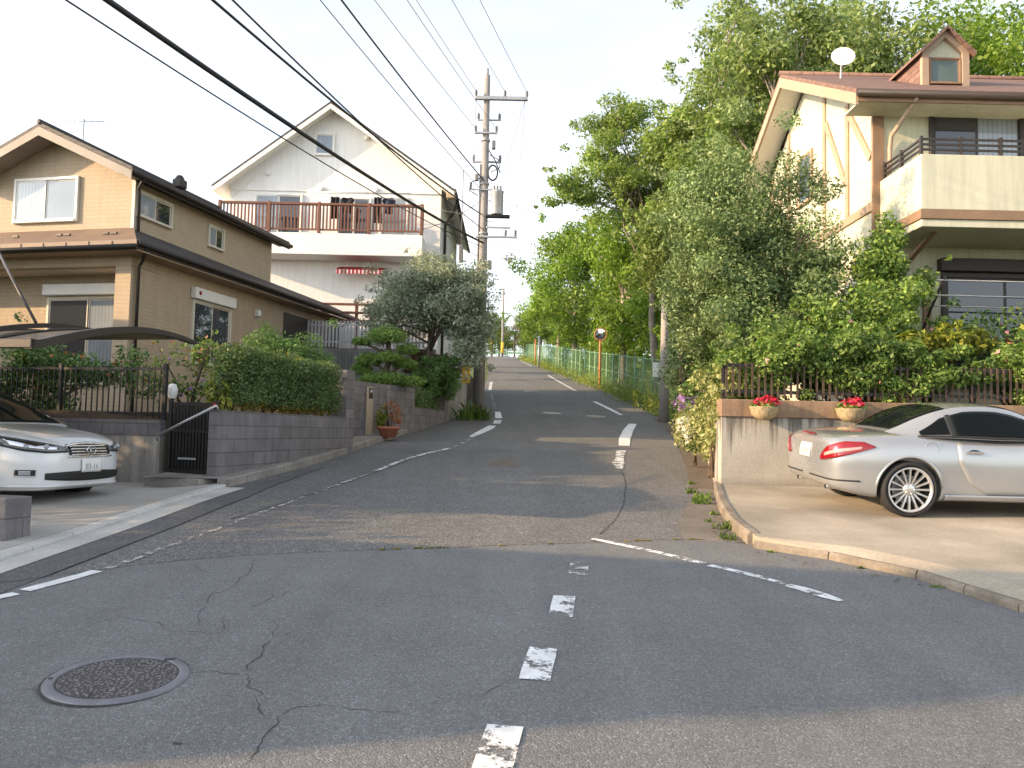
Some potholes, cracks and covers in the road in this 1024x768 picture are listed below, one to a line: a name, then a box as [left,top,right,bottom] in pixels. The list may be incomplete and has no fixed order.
manhole cover [37,654,191,707]
crack [106,563,253,633]
crack [195,622,407,764]
crack [600,473,626,534]
